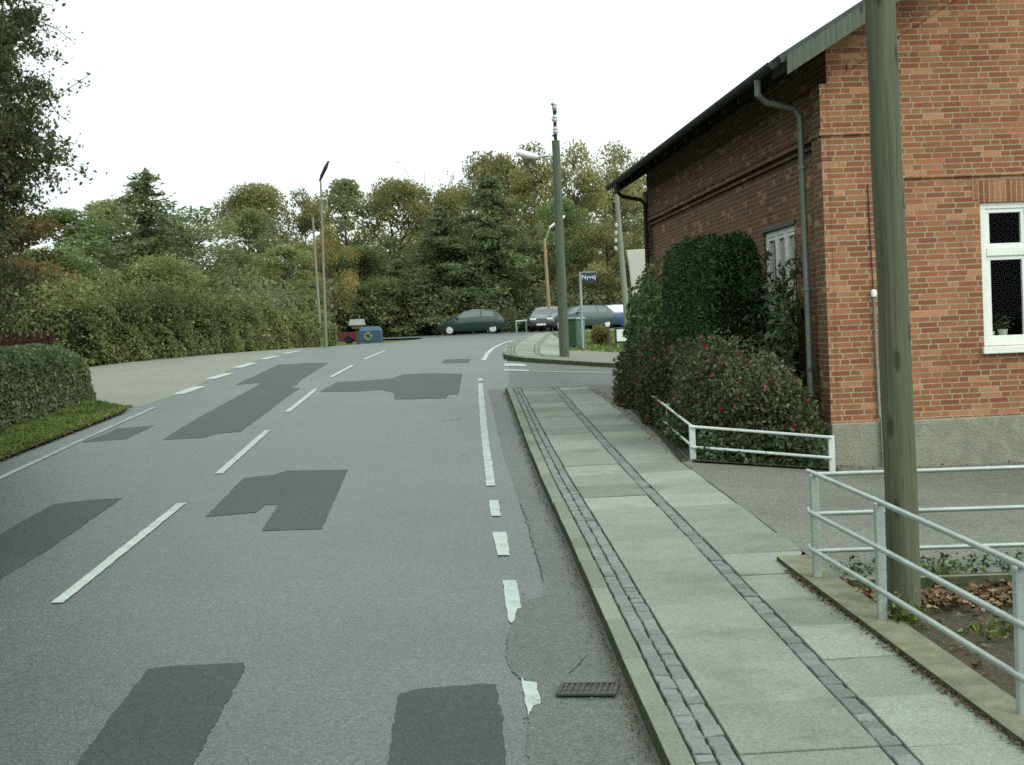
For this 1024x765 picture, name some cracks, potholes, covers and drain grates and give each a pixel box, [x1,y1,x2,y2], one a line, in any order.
drain grate [555,682,620,697]
